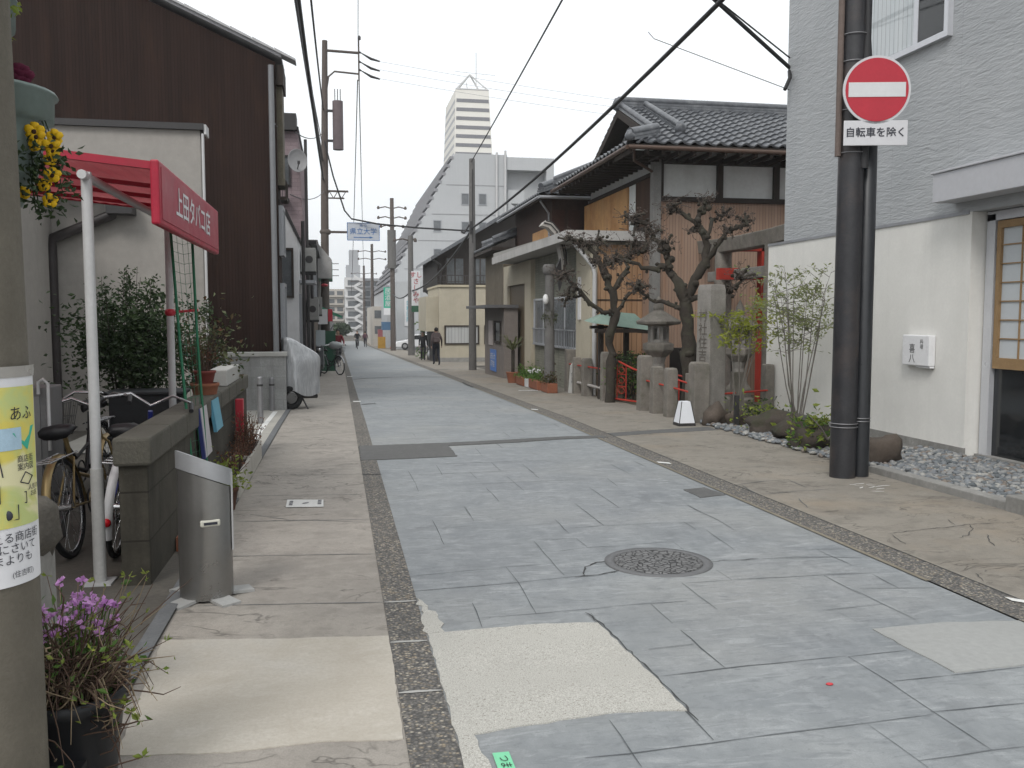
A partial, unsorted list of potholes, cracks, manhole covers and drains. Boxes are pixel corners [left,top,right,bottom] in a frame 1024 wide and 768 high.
crack [892,520,995,546]
manhole cover [605,548,713,577]
